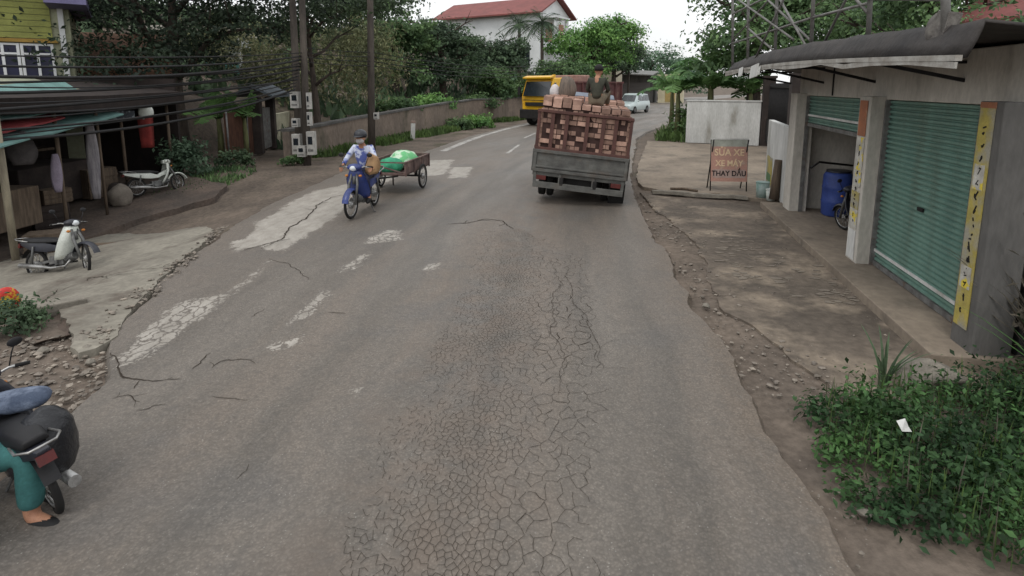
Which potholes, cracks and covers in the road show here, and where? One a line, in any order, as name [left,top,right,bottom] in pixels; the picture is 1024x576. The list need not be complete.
crack [547,263,623,375]
crack [102,353,172,410]
crack [340,229,611,576]
crack [245,195,342,277]
